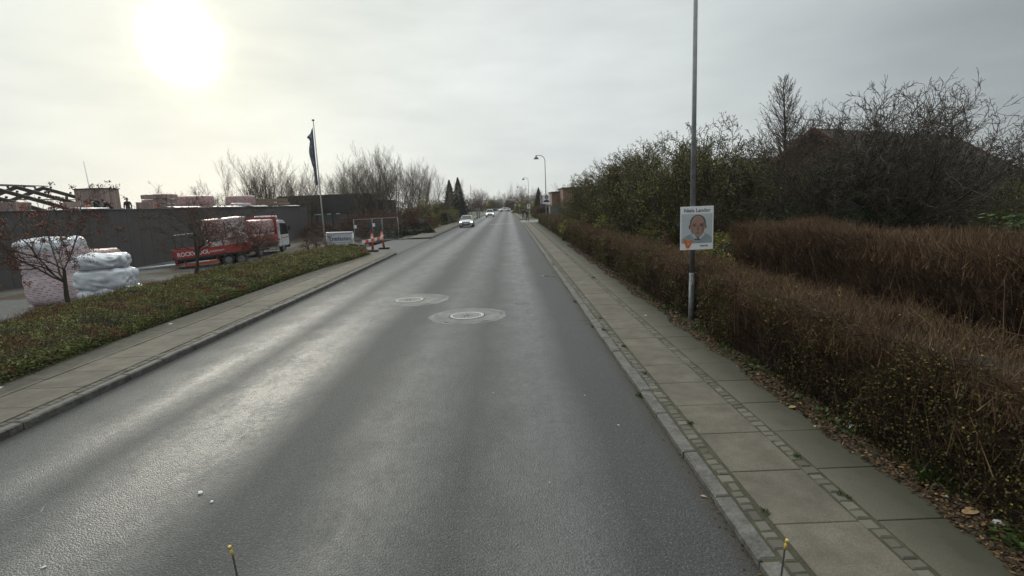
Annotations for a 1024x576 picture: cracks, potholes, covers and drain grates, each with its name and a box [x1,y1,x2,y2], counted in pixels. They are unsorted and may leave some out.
manhole cover [376,294,449,307]
manhole cover [428,308,506,325]
